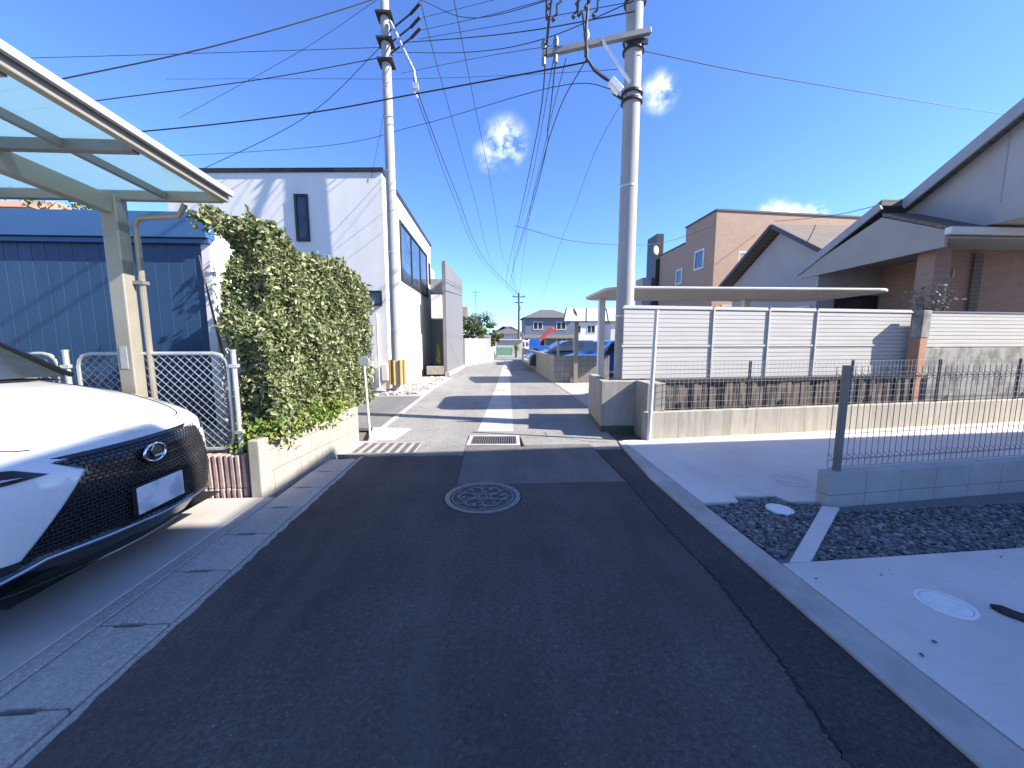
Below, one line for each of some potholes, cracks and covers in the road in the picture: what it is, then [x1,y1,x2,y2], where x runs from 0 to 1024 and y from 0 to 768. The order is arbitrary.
manhole cover [445,482,521,514]
drain grate [348,442,425,454]
drain grate [466,435,520,447]
manhole cover [913,589,980,620]
manhole cover [765,503,794,516]
manhole cover [768,474,812,487]
